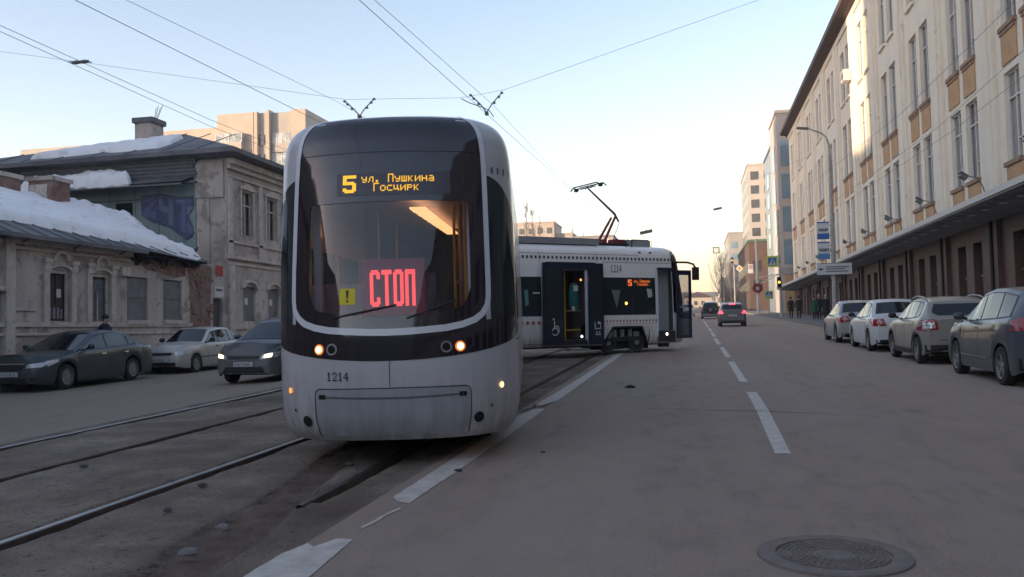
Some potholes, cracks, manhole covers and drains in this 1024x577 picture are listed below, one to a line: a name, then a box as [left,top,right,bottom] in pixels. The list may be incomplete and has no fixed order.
manhole cover [757,535,916,577]
